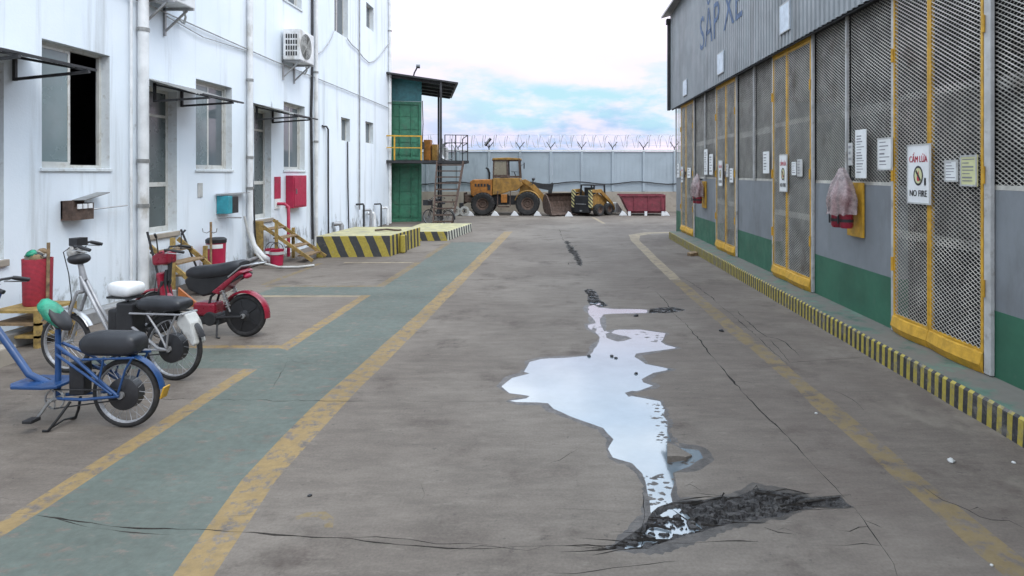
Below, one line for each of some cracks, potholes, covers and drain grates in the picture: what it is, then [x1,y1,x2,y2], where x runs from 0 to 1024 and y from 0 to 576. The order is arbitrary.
pothole [564,485,879,555]
crack [1,497,647,552]
crack [634,277,897,574]
pothole [583,289,608,307]
